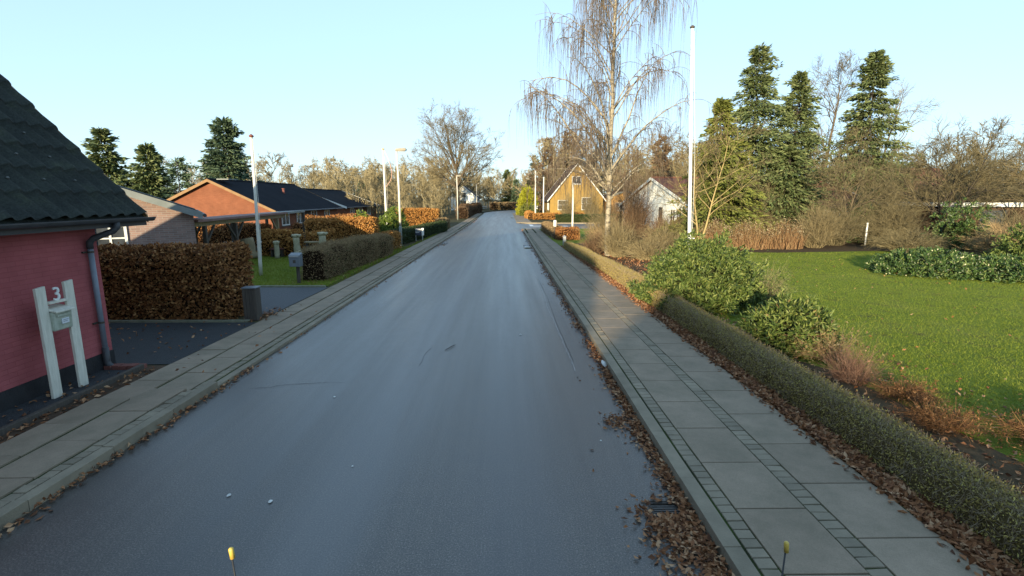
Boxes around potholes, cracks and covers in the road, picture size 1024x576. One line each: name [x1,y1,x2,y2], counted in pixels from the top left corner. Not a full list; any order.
drain grate [648,501,690,521]
